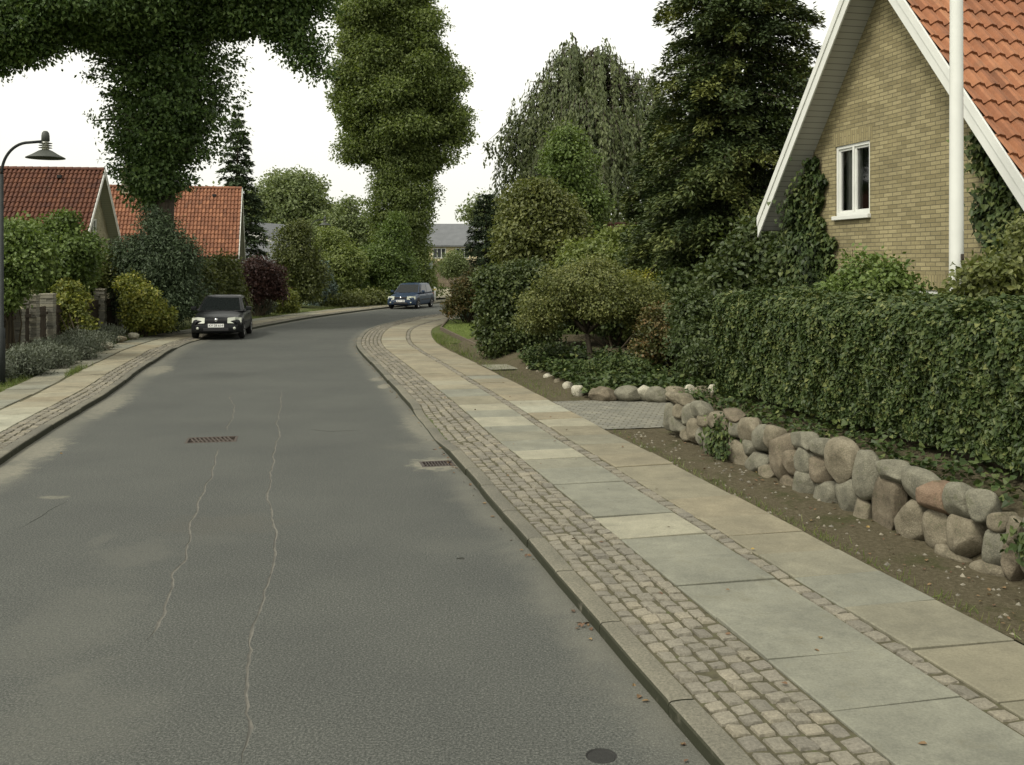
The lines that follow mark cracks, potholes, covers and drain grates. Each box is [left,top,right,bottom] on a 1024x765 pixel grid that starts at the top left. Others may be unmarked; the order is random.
crack [150,392,282,763]
drain grate [185,436,238,449]
manhole cover [585,748,617,764]
